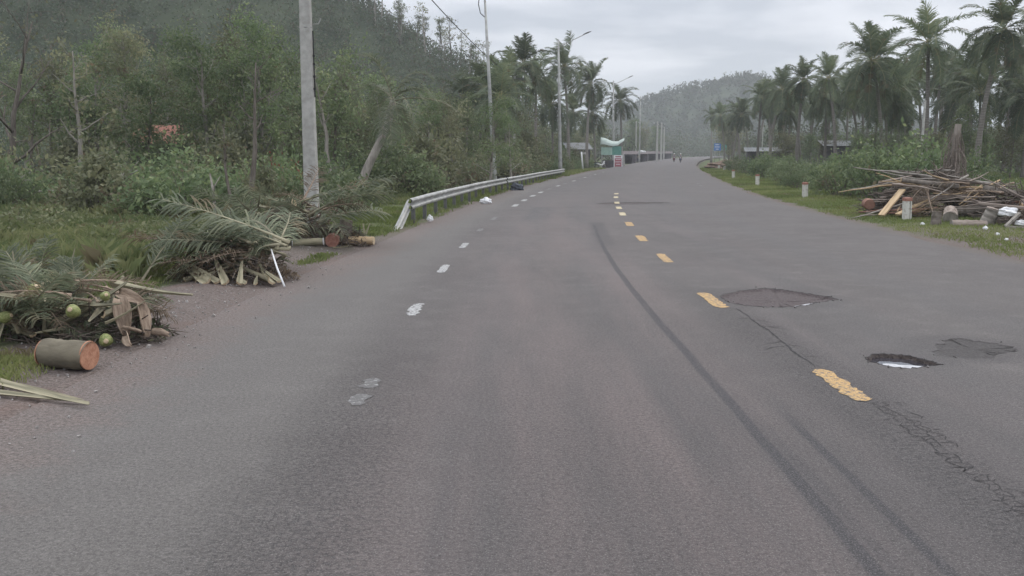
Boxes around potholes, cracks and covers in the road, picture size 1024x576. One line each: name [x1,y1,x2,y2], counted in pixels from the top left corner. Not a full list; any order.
pothole [863,353,944,369]
crack [861,401,1024,516]
crack [736,308,815,367]
